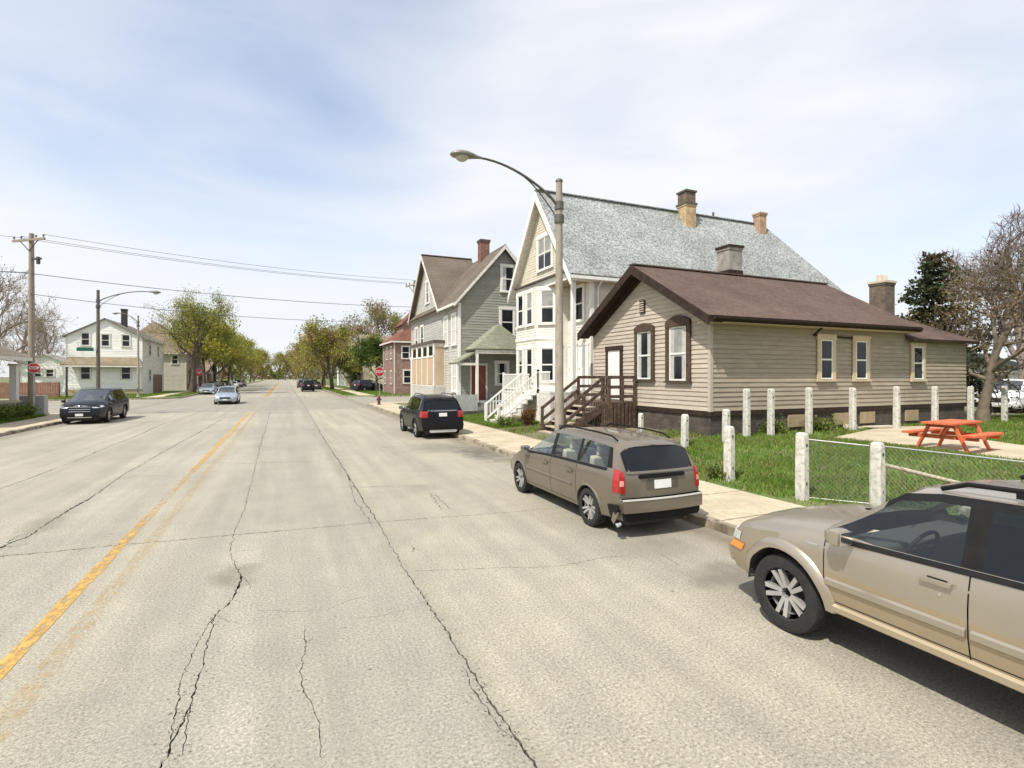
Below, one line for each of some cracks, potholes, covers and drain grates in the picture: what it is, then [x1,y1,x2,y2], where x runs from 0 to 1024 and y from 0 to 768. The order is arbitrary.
crack [0,391,626,768]
